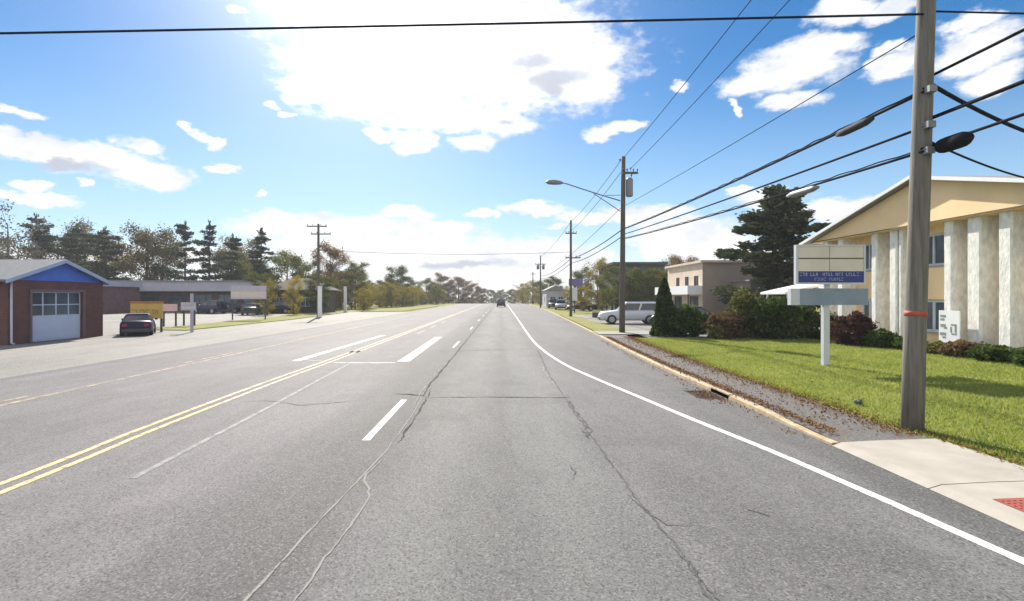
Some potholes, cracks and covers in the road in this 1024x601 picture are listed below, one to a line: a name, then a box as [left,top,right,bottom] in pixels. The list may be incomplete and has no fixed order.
crack [243,309,720,601]
drain grate [685,388,729,399]
